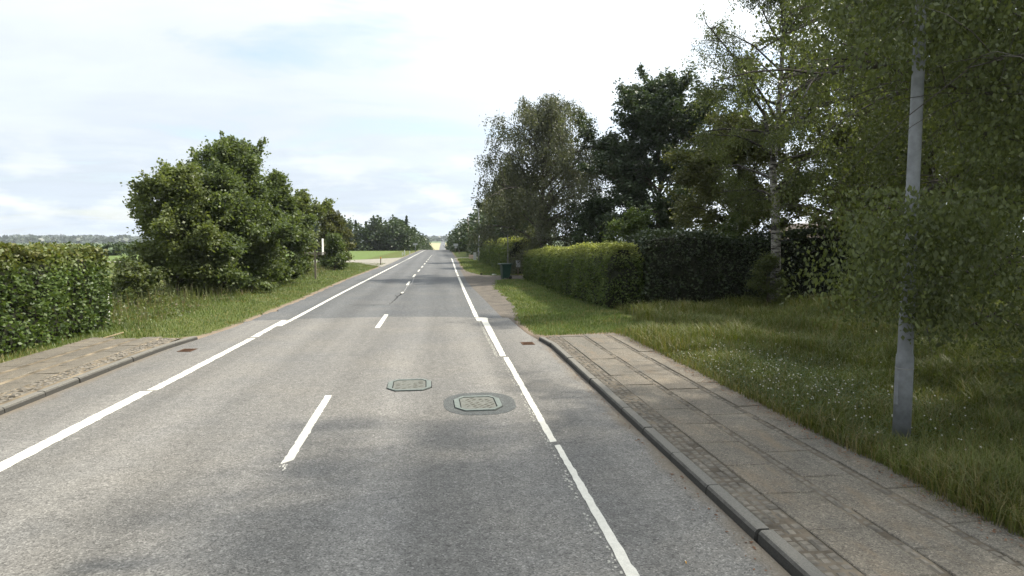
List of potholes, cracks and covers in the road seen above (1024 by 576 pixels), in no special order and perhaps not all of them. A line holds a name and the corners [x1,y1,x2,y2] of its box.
manhole cover [386,378,432,392]
manhole cover [453,395,503,412]
